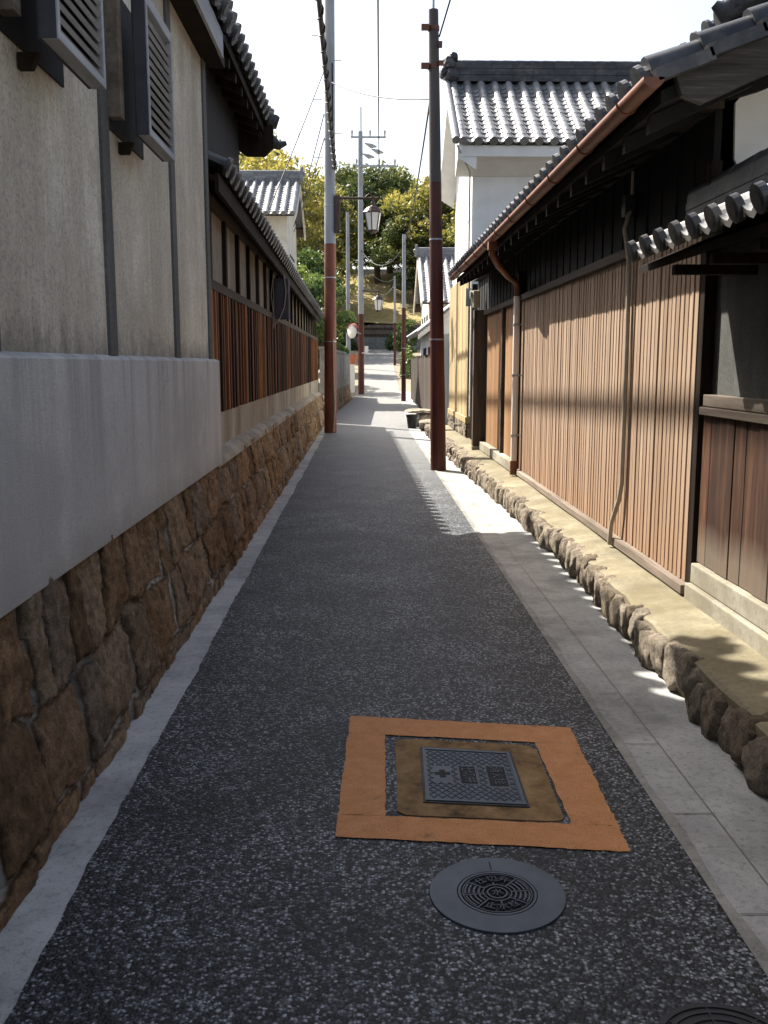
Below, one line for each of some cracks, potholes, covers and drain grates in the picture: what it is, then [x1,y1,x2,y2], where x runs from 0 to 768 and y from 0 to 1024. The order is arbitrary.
manhole cover [429,858,566,935]
manhole cover [395,739,564,822]
manhole cover [658,1003,768,1024]
